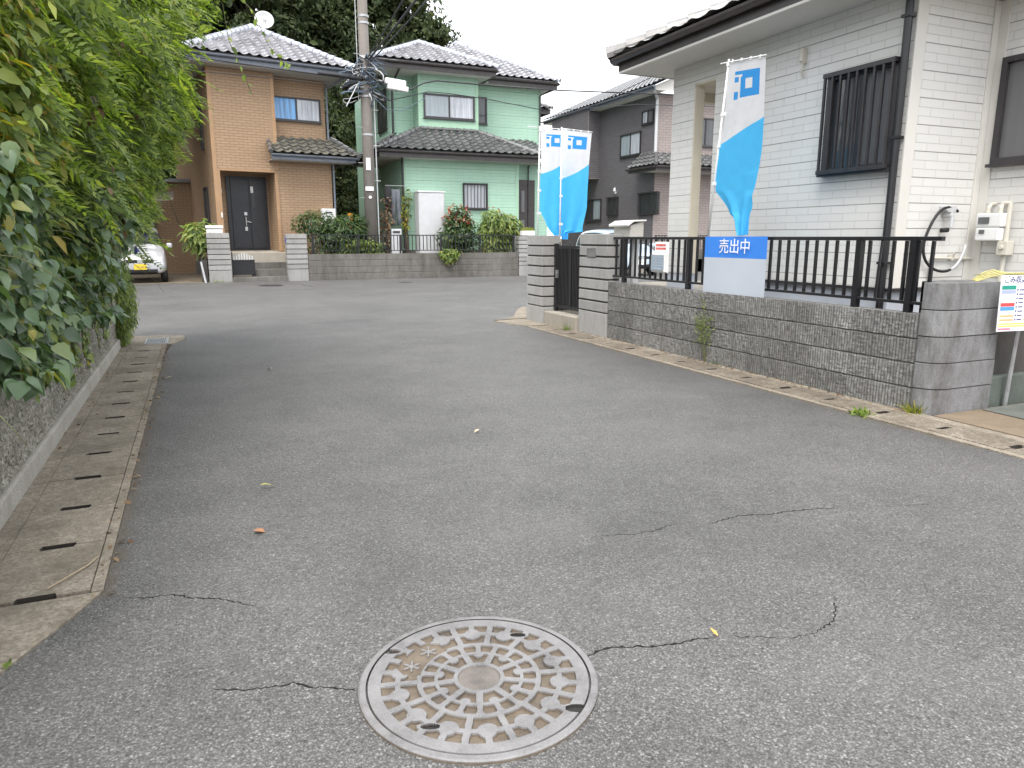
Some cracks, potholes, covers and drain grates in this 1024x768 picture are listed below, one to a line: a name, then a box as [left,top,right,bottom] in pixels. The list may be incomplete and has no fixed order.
crack [121,594,254,606]
crack [211,681,355,691]
crack [602,504,928,536]
manhole cover [358,616,598,765]
crack [587,592,837,656]
drain grate [144,337,169,345]
